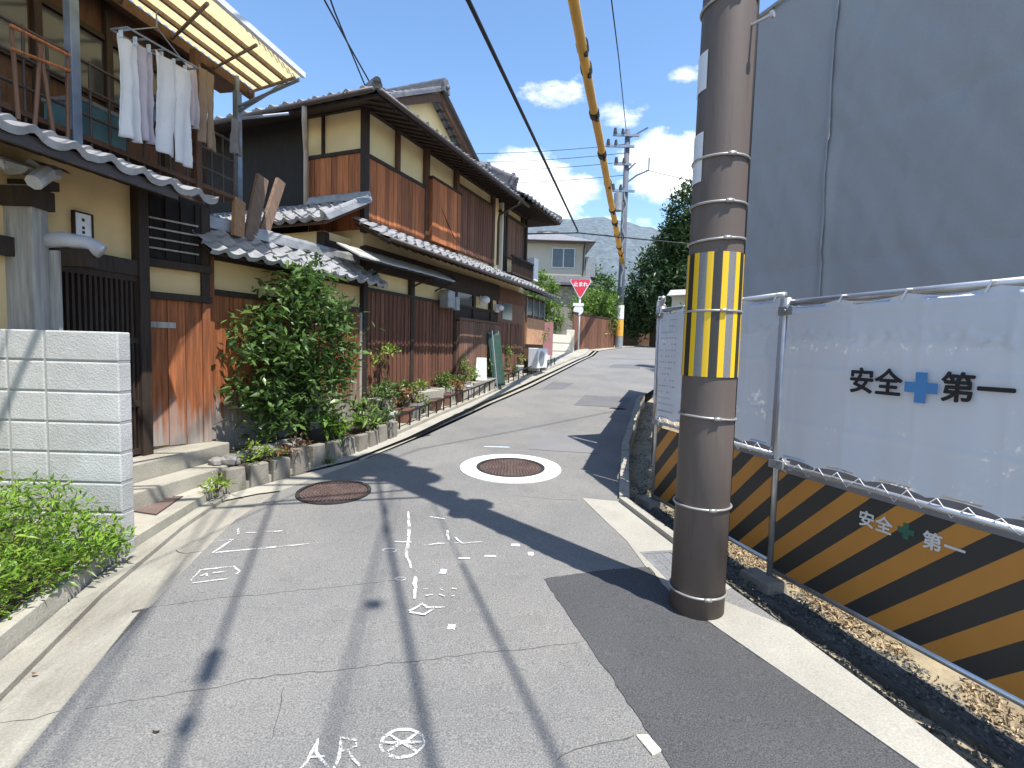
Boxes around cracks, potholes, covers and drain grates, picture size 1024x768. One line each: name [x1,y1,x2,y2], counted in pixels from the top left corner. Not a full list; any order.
crack [85,642,580,739]
manhole cover [295,480,371,505]
manhole cover [460,454,561,484]
crack [557,735,634,761]
drain grate [640,550,672,581]
